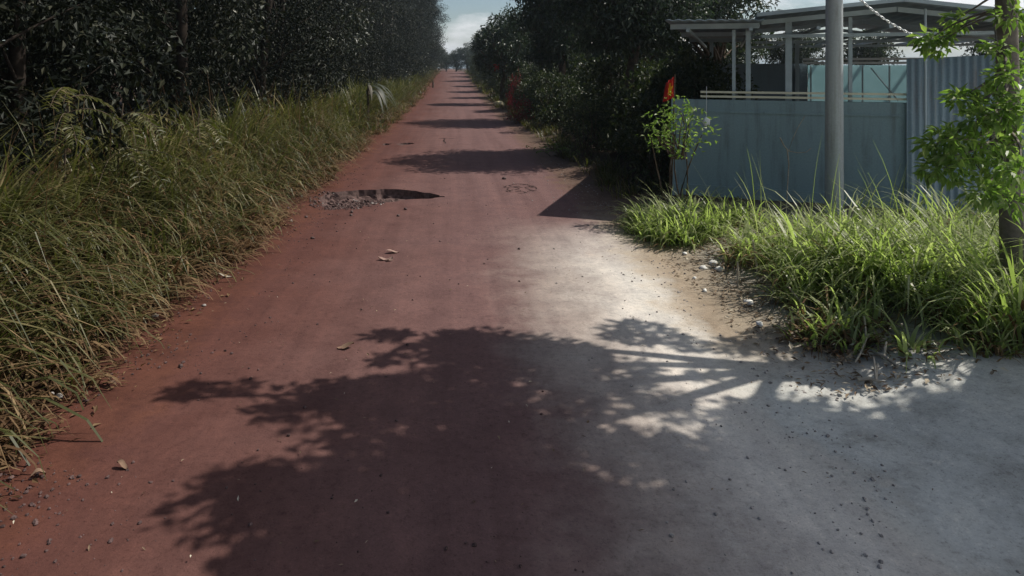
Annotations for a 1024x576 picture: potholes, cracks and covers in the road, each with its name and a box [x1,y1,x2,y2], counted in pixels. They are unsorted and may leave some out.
pothole [309,189,445,210]
